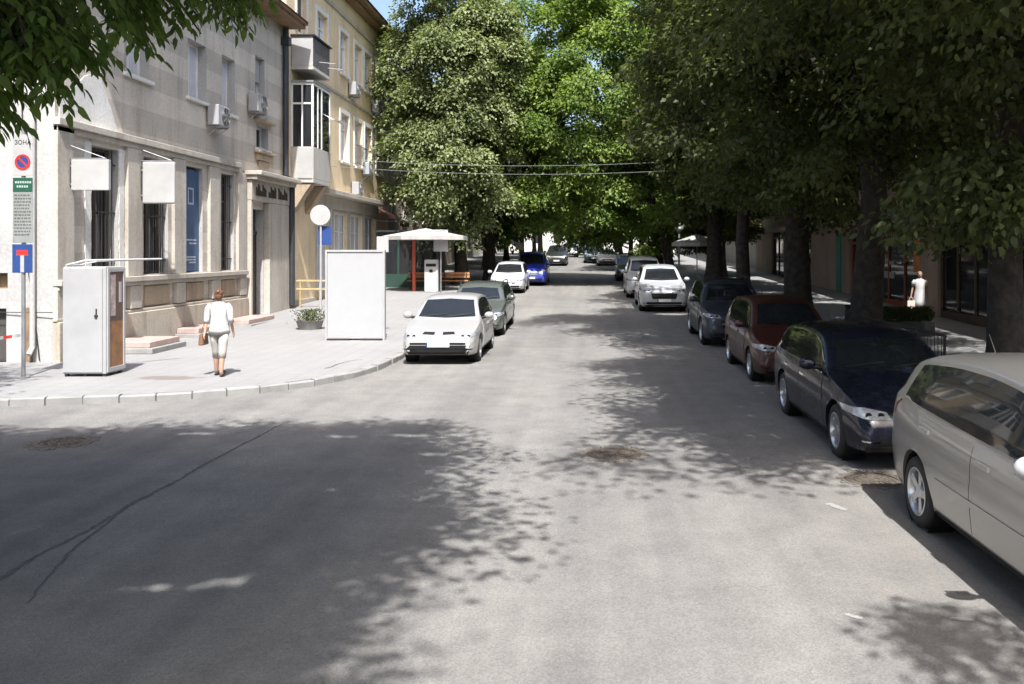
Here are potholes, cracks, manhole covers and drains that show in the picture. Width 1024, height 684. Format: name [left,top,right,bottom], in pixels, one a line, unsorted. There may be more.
crack [0,425,279,603]
manhole cover [22,435,101,451]
manhole cover [836,469,904,490]
